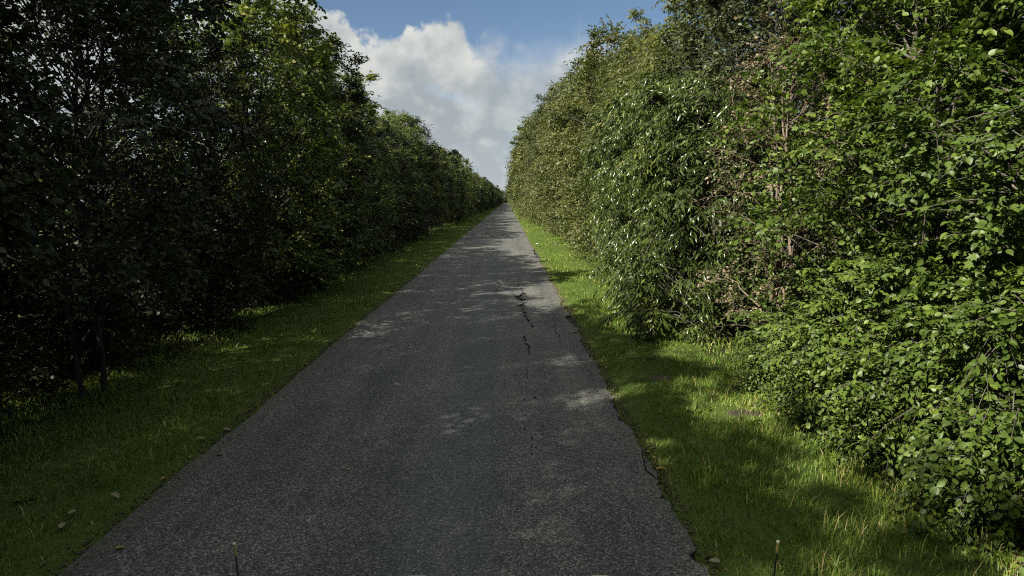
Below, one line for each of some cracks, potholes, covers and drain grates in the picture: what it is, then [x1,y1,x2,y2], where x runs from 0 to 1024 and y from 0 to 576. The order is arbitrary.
crack [516,283,593,379]
